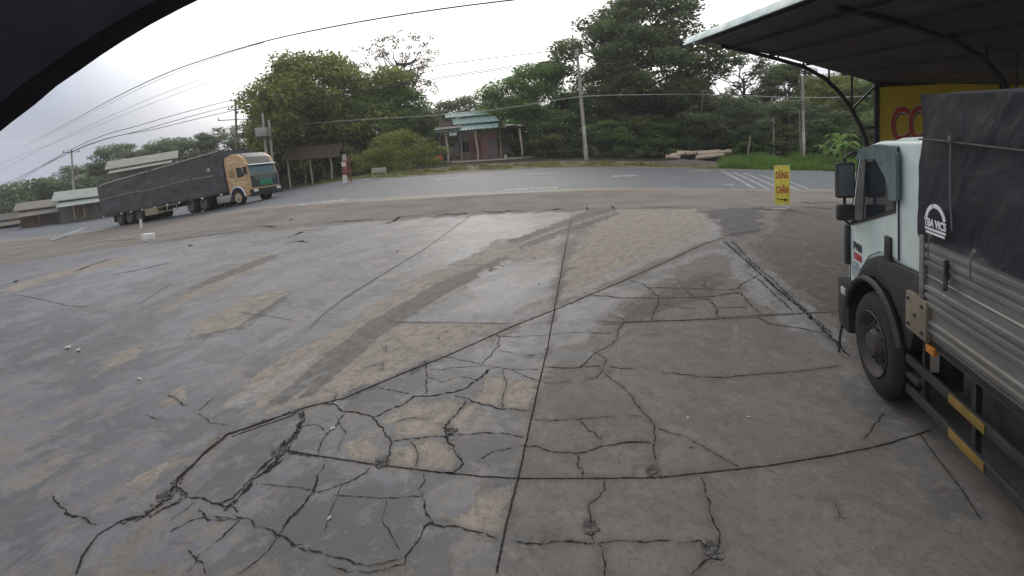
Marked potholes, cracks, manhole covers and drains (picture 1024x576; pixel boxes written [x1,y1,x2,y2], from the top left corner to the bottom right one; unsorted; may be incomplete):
crack [52,496,96,525]
crack [522,228,850,475]
crack [275,334,544,474]
crack [517,477,720,576]
crack [148,410,499,574]
